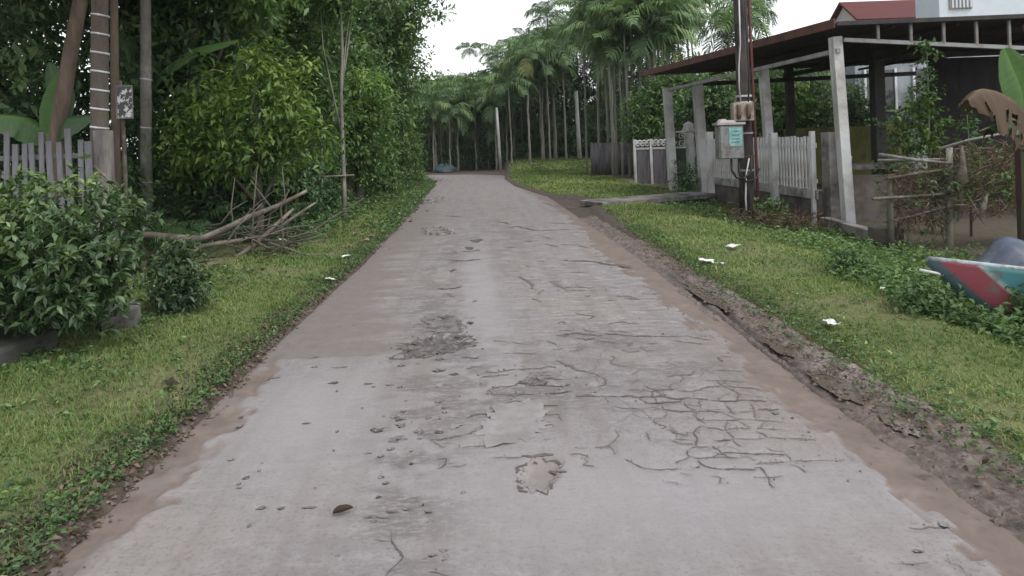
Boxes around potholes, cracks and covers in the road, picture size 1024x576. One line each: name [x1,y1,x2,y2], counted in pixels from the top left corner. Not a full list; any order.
pothole [419,225,455,236]
crack [370,313,972,575]
pothole [389,331,480,360]
crack [495,202,633,302]
pothole [515,451,567,495]
